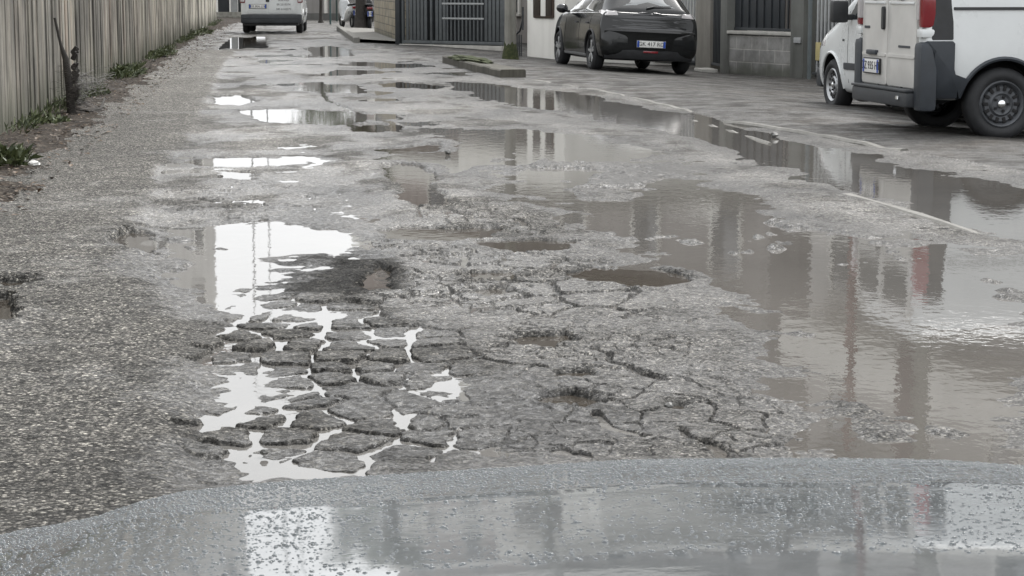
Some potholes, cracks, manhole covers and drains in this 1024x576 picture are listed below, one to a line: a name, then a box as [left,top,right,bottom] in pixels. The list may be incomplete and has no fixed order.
crack [191,197,815,473]
pothole [375,161,461,207]
pothole [104,224,169,255]
pothole [473,237,587,252]
pothole [208,169,262,180]
pothole [180,156,310,168]
pothole [231,107,369,126]
pothole [0,289,28,320]
pothole [350,261,400,290]
pothole [552,262,695,290]
pothole [541,365,604,377]
pothole [656,395,699,410]
